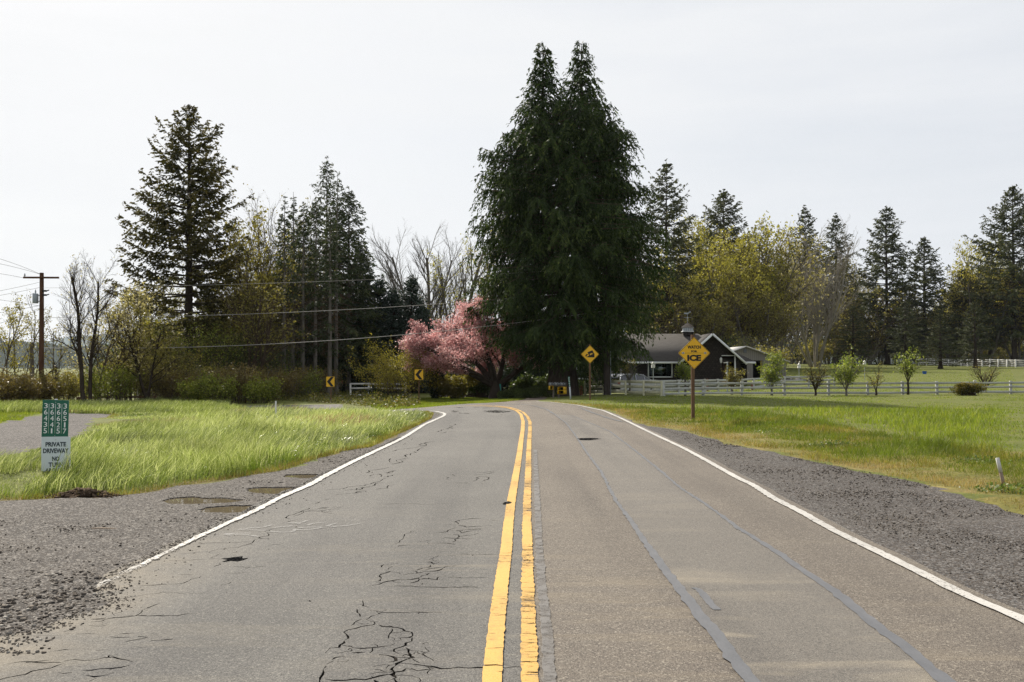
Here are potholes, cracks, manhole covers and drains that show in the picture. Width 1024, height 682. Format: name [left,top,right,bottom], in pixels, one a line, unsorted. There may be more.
crack [0,407,517,682]
